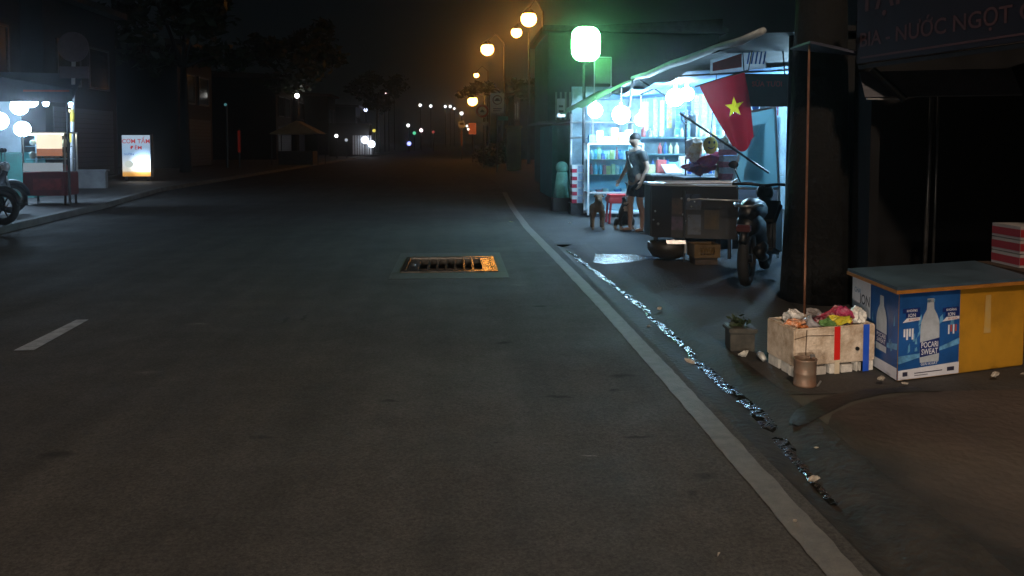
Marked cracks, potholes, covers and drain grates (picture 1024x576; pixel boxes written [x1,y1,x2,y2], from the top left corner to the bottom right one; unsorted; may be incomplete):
drain grate [388,252,509,279]
